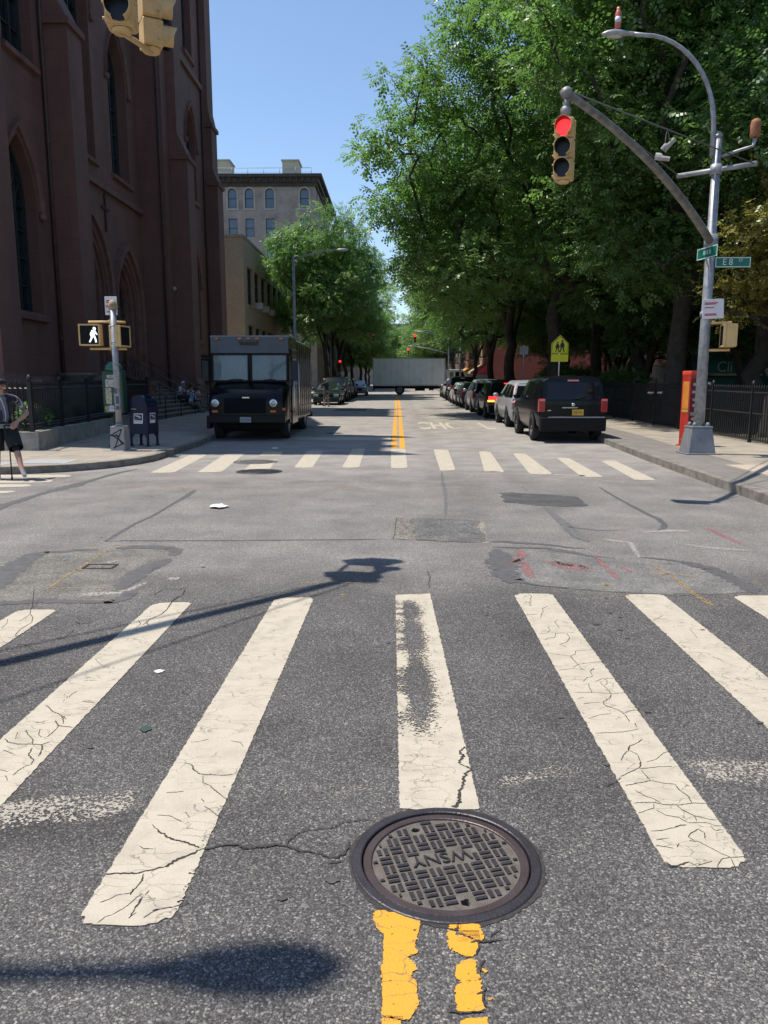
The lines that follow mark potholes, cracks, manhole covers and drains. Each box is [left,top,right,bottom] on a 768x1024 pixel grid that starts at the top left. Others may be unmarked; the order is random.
crack [94,739,368,923]
crack [452,746,473,808]
manhole cover [351,808,542,925]
